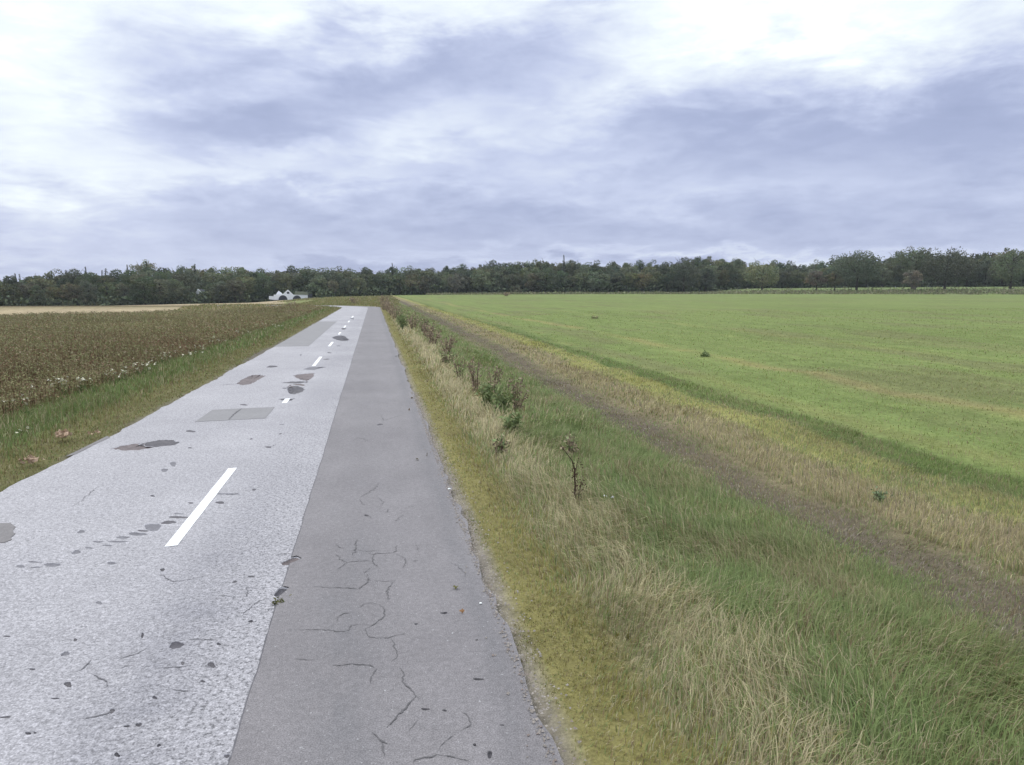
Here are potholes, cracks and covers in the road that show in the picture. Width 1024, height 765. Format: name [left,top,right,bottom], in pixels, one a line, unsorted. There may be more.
crack [75,648,188,684]
crack [414,712,471,760]
crack [300,543,419,754]
